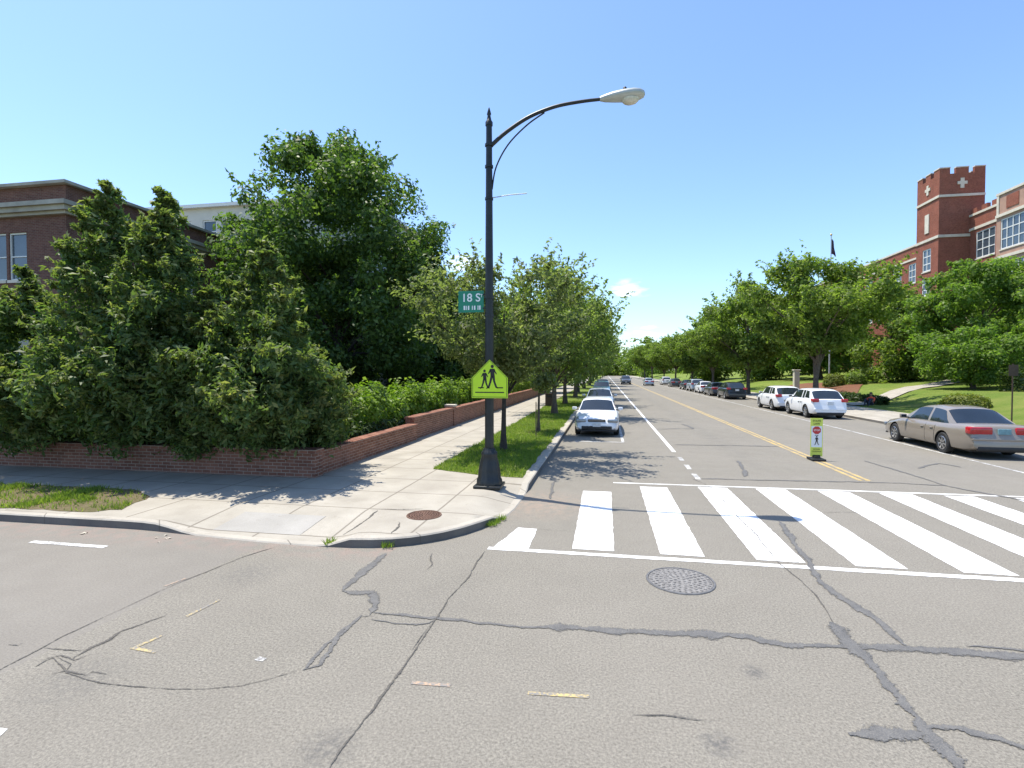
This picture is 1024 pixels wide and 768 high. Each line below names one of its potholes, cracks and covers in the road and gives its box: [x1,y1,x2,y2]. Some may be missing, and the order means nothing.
manhole cover [406,510,442,520]
crack [694,479,833,622]
crack [329,551,485,768]
manhole cover [646,567,716,595]
crack [1,547,297,689]
